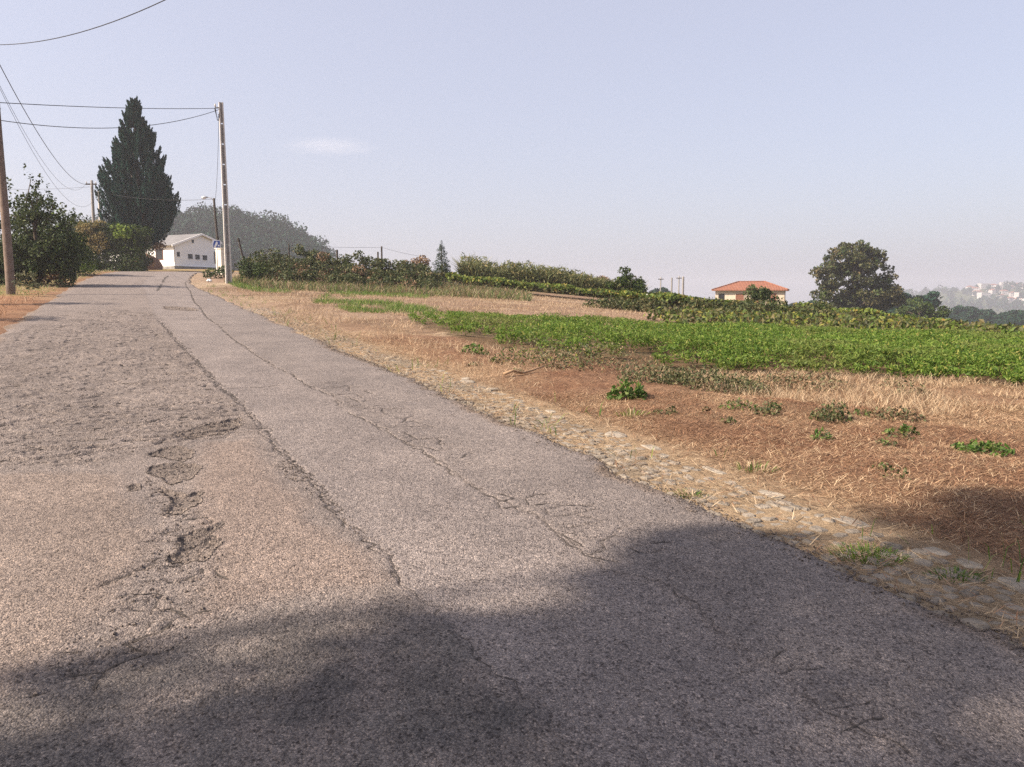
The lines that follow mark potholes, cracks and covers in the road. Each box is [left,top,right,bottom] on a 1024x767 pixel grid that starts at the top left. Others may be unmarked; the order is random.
pothole [171,417,243,439]
pothole [165,521,224,565]
pothole [157,486,203,515]
pothole [145,462,202,485]
